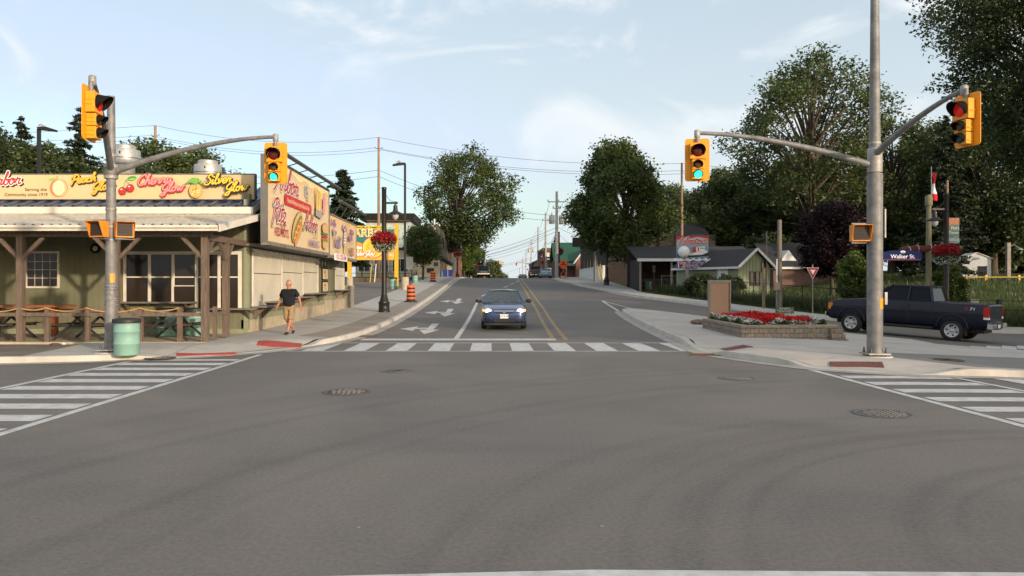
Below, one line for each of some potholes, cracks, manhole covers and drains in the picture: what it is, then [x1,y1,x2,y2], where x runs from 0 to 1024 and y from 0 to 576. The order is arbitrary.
manhole cover [851,409,916,419]
